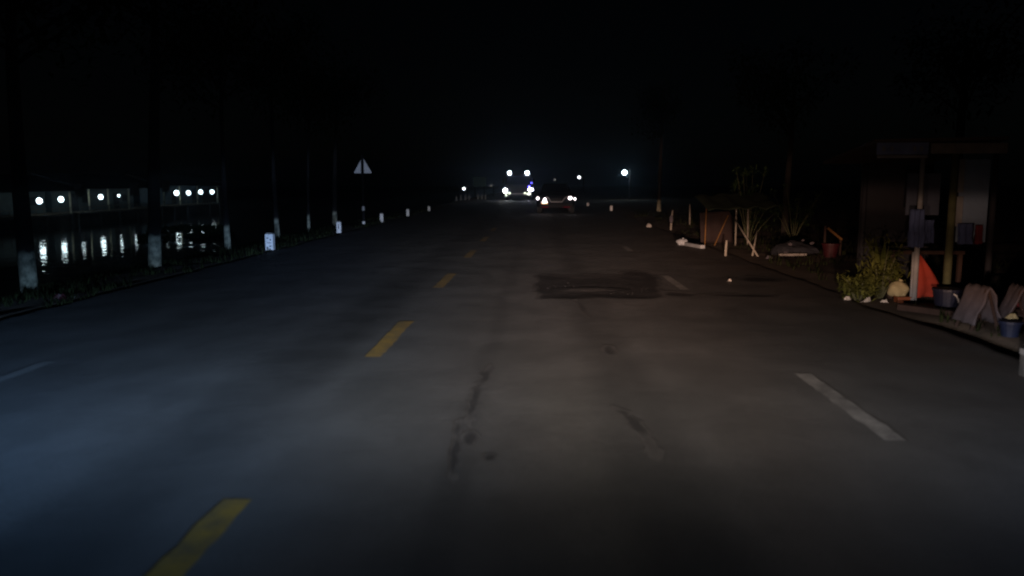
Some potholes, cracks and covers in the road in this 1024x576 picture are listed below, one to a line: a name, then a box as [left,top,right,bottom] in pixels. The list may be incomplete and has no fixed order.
pothole [600,345,620,355]
crack [447,363,495,484]
crack [609,405,665,462]
